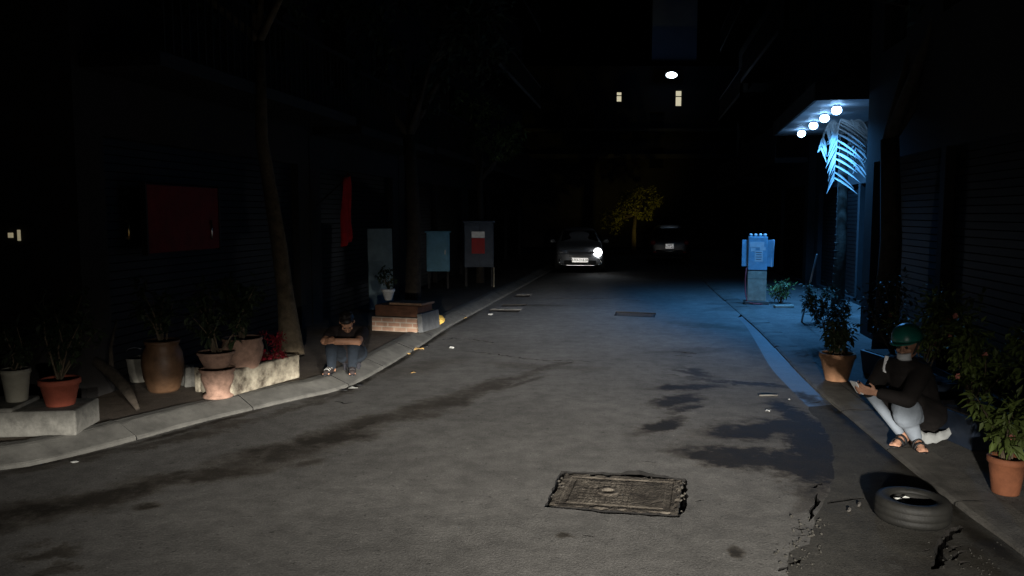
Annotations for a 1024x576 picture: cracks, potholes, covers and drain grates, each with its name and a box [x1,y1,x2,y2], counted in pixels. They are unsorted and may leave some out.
crack [442,338,587,363]
manhole cover [544,470,688,517]
crack [778,483,822,571]
